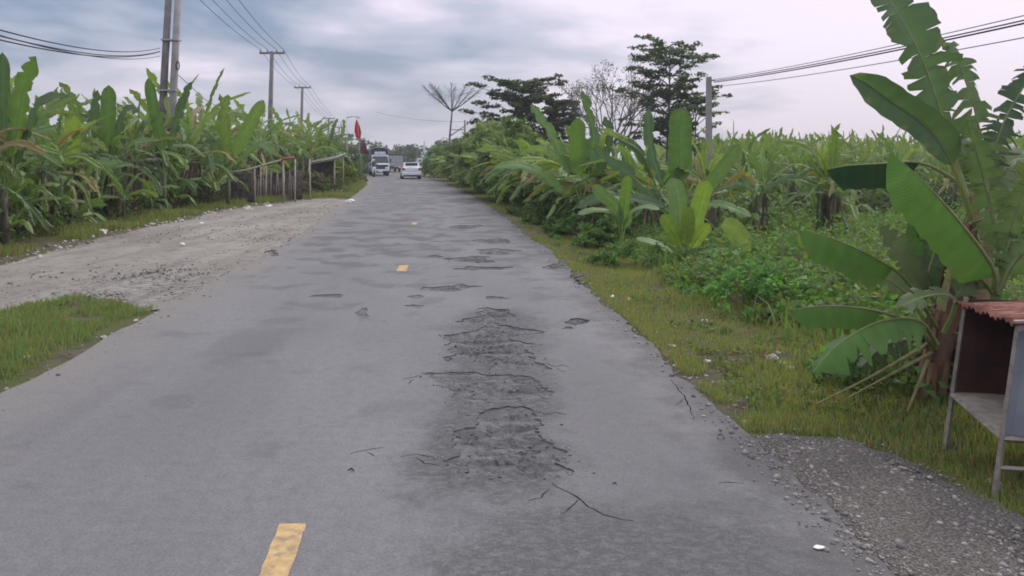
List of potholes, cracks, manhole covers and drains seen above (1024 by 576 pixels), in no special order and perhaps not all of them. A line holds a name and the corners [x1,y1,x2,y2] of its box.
pothole [421,284,482,292]
crack [528,484,633,521]
pothole [443,406,574,479]
pothole [425,372,554,403]
pothole [443,307,552,370]
